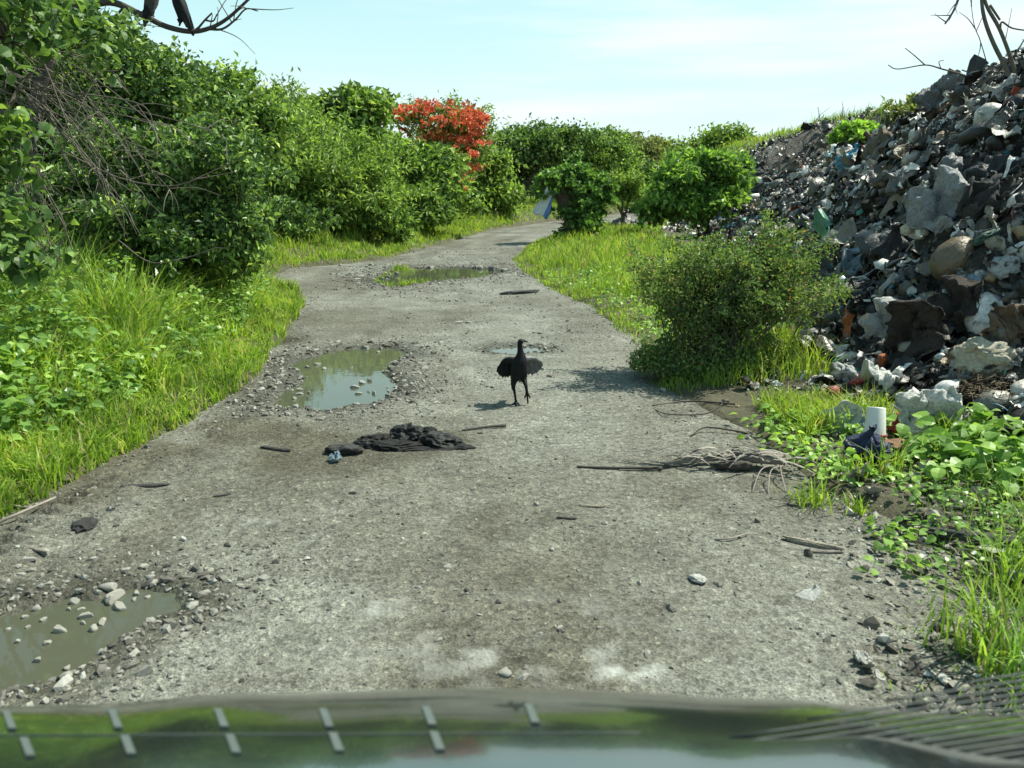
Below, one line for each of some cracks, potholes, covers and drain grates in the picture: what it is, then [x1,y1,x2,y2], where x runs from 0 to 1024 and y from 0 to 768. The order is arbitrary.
pothole [0,577,200,692]
pothole [262,344,416,410]
pothole [373,267,506,287]
pothole [483,344,558,355]
